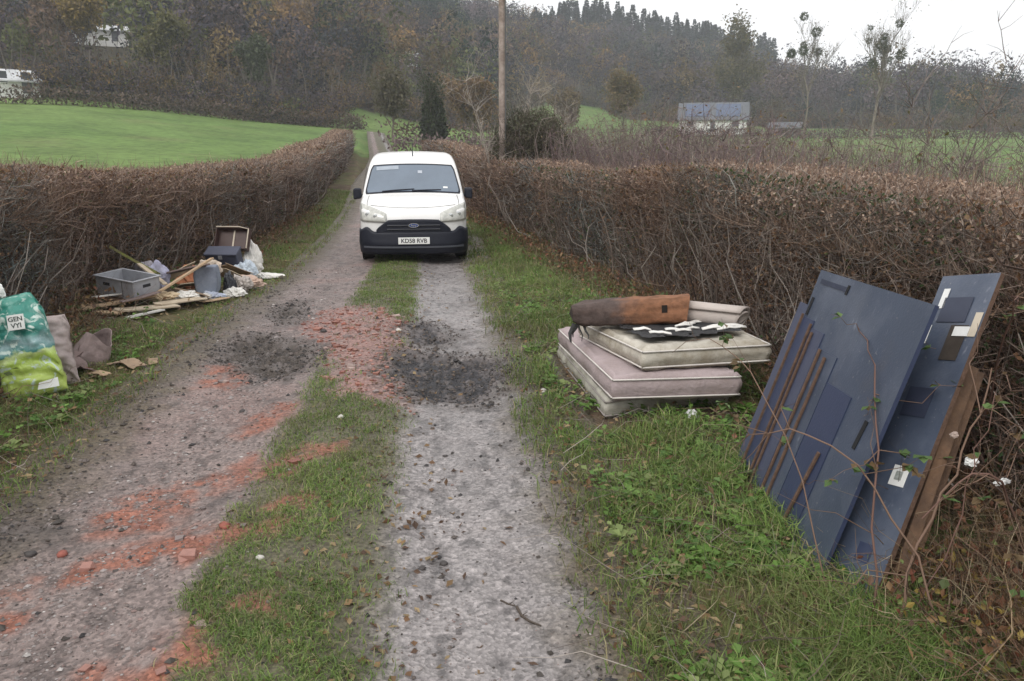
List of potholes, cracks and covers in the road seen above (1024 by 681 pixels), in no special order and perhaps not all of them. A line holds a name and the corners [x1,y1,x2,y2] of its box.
pothole [387,347,511,405]
pothole [399,321,450,347]
pothole [217,333,322,379]
pothole [273,301,306,323]
